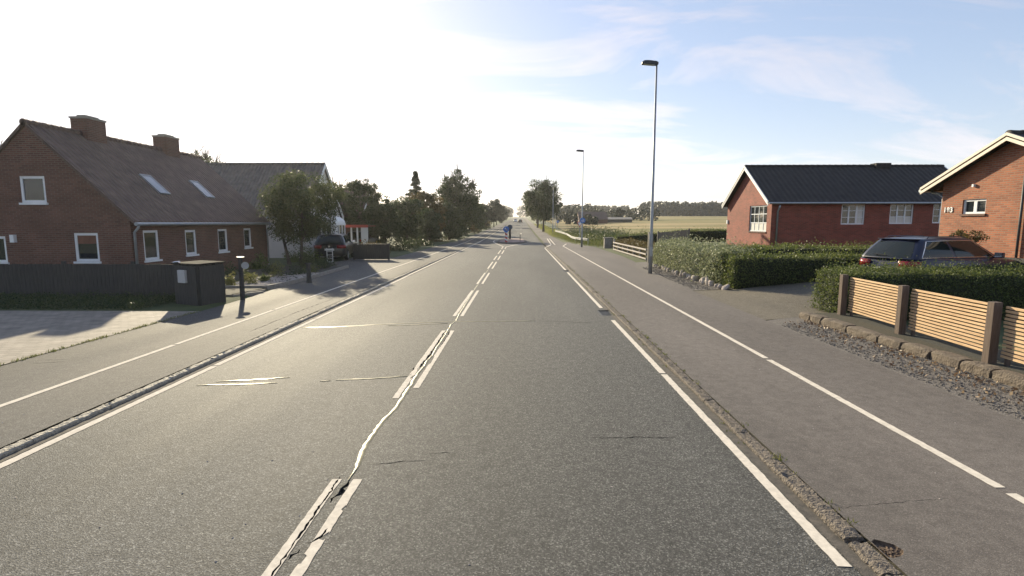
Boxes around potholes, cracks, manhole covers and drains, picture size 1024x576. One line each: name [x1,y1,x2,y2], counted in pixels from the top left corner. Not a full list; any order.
crack [271,477,340,576]
pothole [871,539,904,559]
